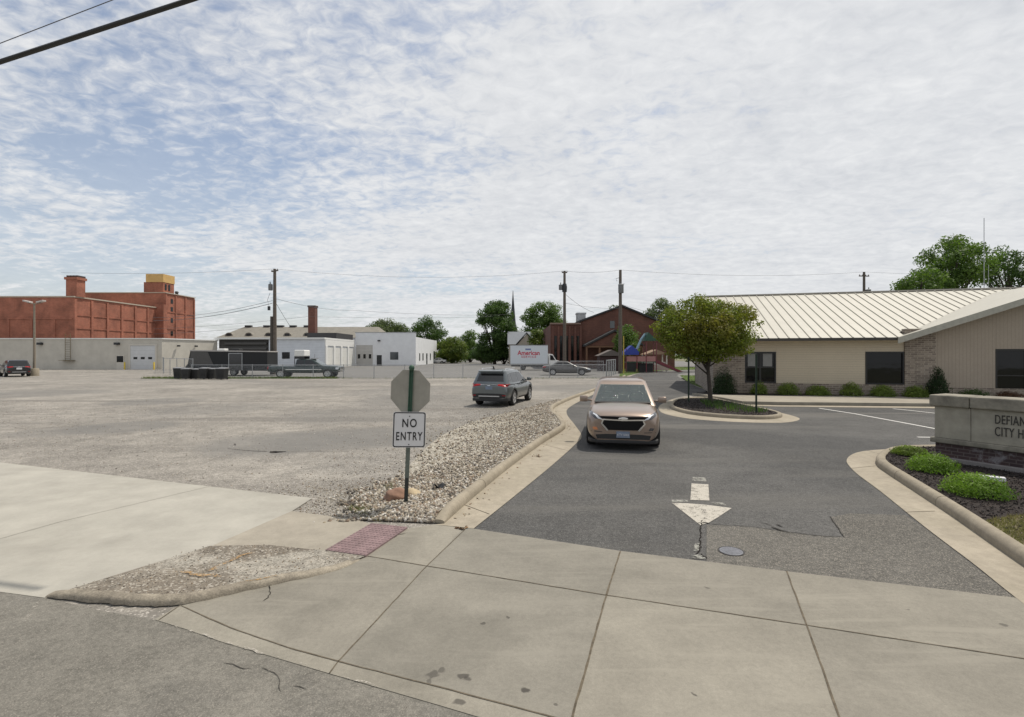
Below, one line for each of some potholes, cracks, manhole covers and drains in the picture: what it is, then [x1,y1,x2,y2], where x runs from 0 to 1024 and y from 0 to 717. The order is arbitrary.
crack [223,662,306,691]
crack [693,520,707,559]
manhole cover [718,546,745,556]
